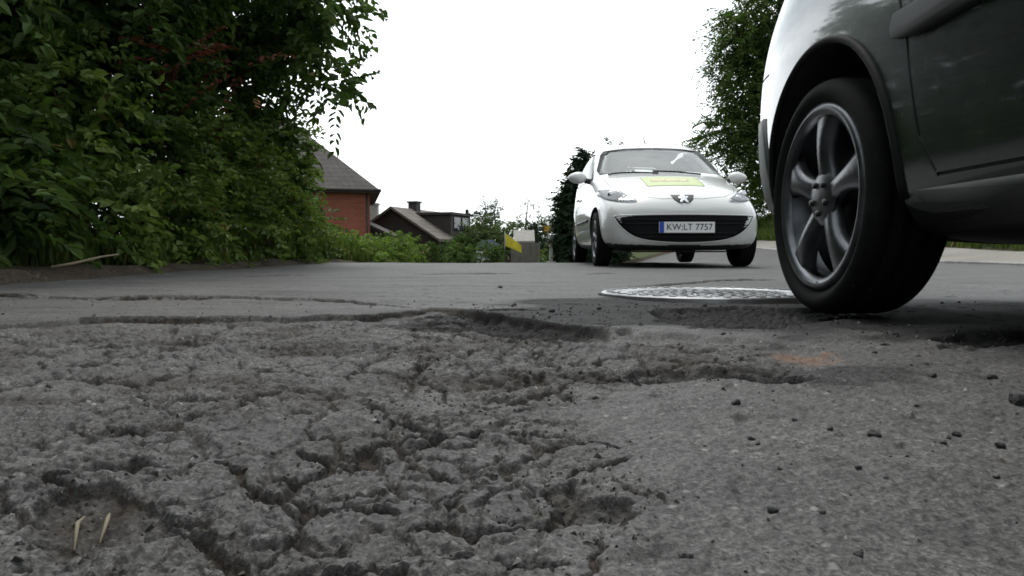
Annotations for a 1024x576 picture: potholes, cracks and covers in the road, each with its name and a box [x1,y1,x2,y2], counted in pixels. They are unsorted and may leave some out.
pothole [930,332,1024,352]
crack [0,292,841,576]
manhole cover [601,286,801,304]
pothole [21,482,218,566]
pothole [649,306,868,330]
pothole [622,366,817,385]
pothole [446,309,609,344]
